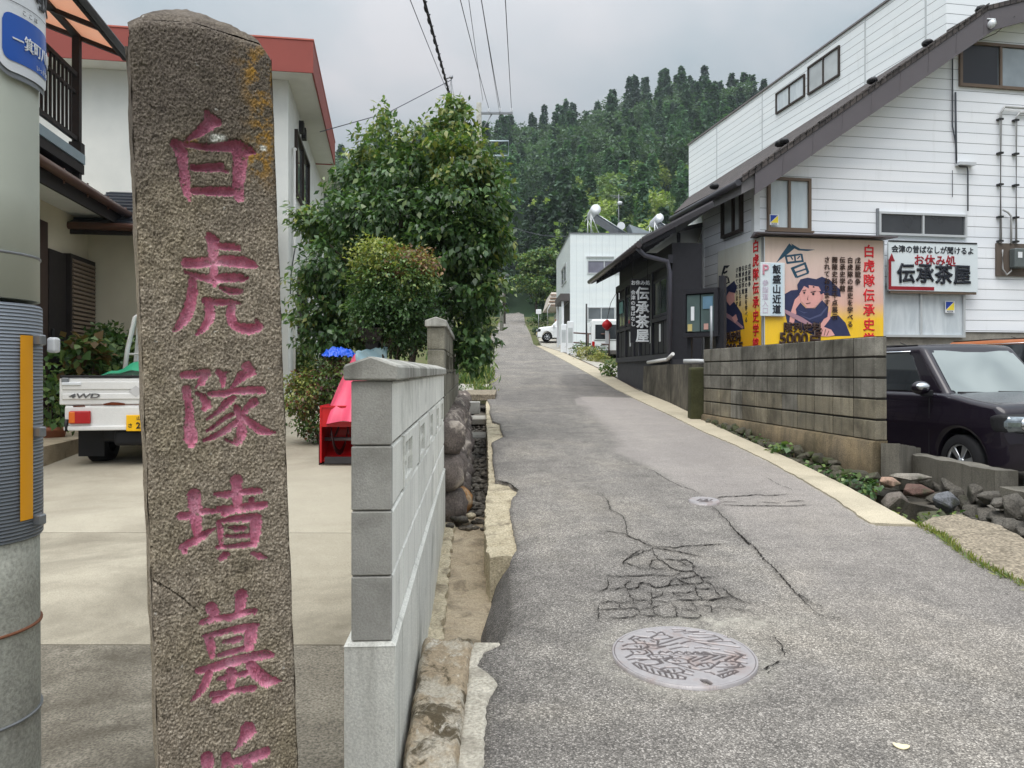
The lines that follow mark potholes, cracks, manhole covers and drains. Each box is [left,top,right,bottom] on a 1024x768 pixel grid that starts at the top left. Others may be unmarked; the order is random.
crack [592,493,756,619]
crack [646,468,839,618]
manhole cover [688,496,720,506]
manhole cover [612,626,758,691]
